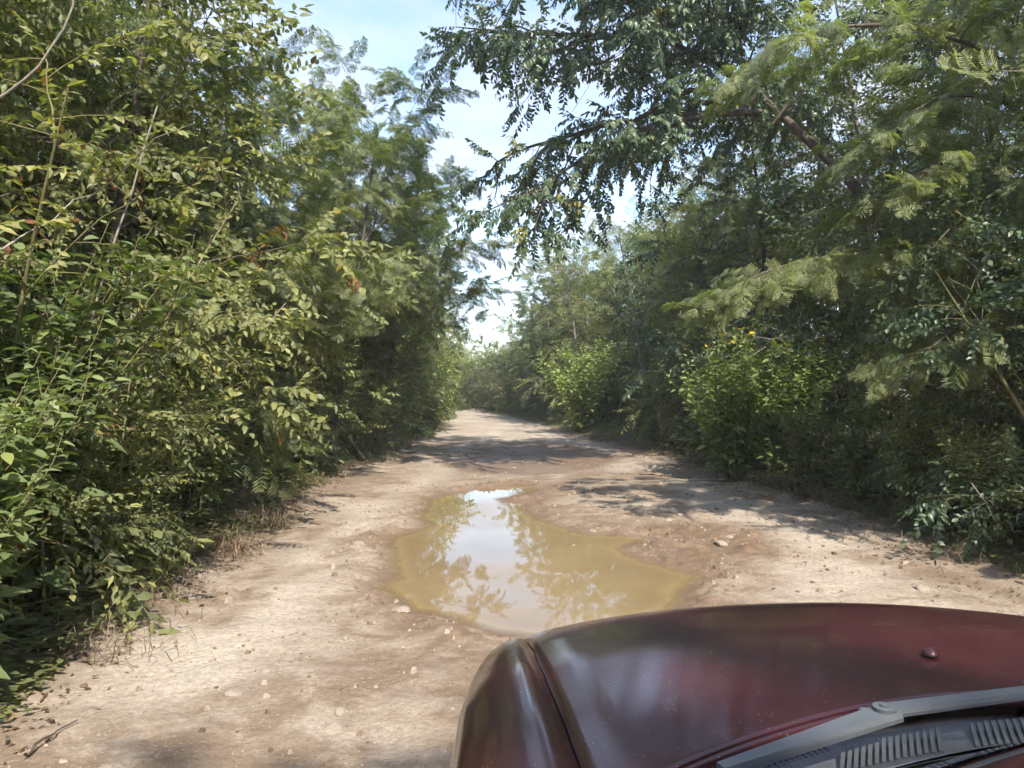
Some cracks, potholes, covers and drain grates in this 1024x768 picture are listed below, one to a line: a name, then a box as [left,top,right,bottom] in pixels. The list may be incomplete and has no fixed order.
pothole [332,481,753,646]
